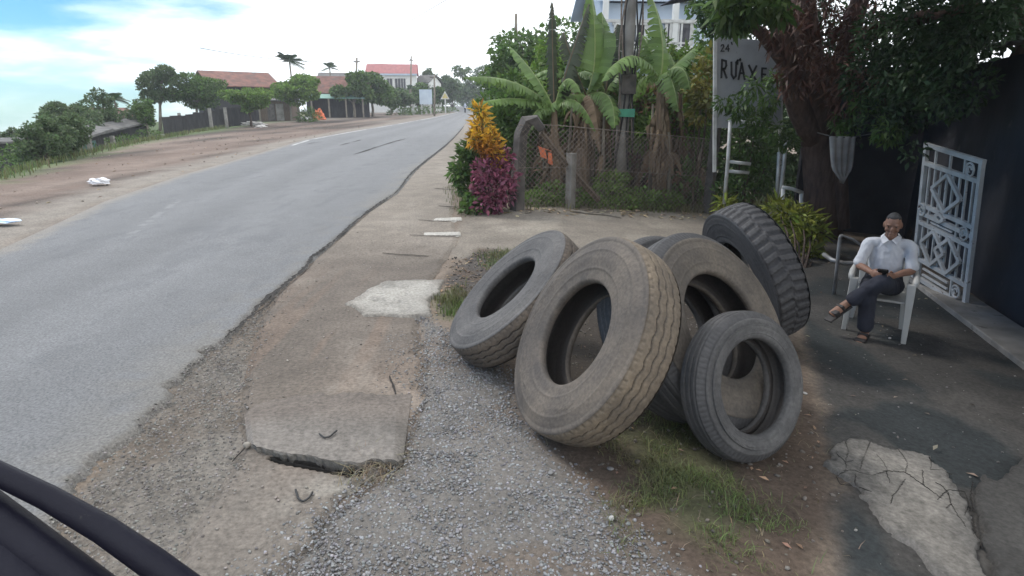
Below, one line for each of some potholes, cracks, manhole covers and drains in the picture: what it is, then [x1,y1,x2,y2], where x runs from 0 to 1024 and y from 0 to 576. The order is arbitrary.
crack [836,441,984,548]
